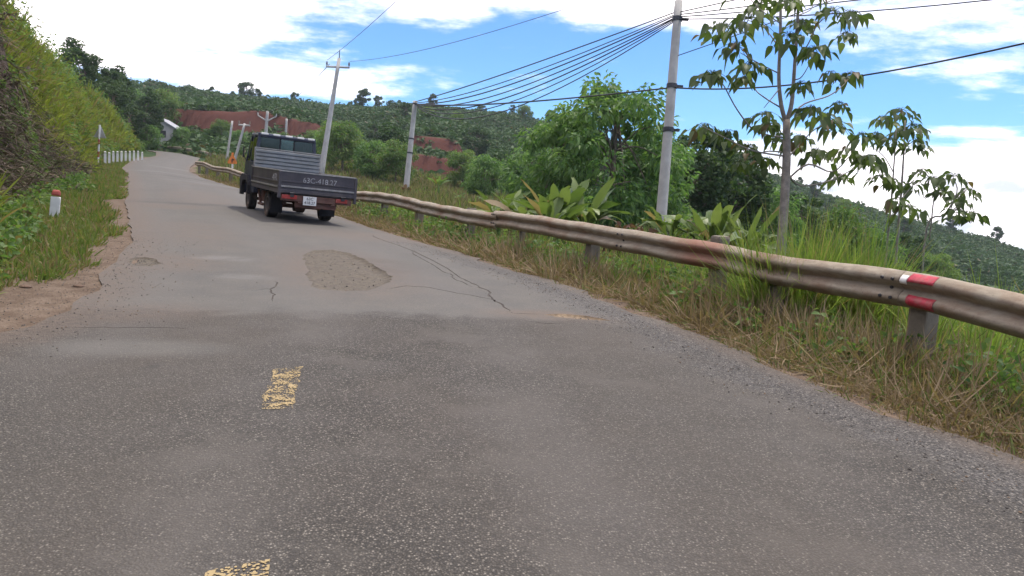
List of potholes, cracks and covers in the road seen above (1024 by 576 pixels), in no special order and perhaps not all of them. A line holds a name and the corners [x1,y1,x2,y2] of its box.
crack [373,236,636,324]
